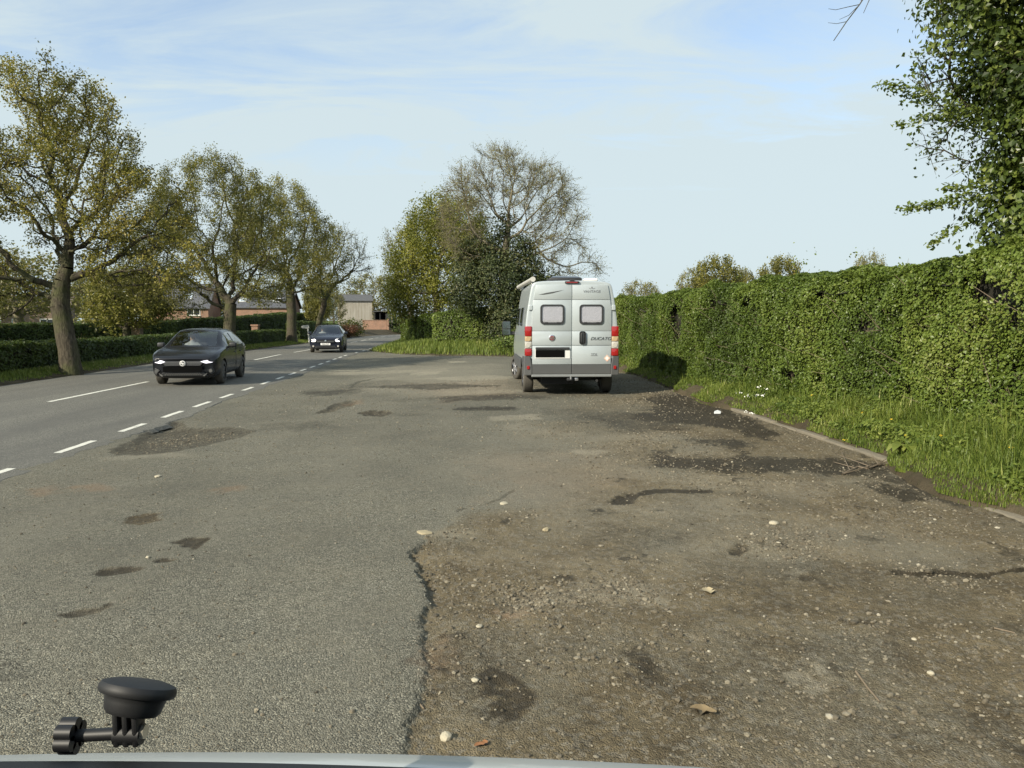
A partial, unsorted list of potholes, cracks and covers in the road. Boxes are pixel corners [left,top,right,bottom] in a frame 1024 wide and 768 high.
crack [888,565,1024,579]
pothole [52,598,122,620]
crack [629,488,715,500]
pothole [169,535,218,552]
pothole [314,400,361,415]
crack [398,537,447,755]
pothole [108,420,260,456]
pothole [119,511,170,526]
pothole [357,409,396,417]
pothole [89,564,155,577]
